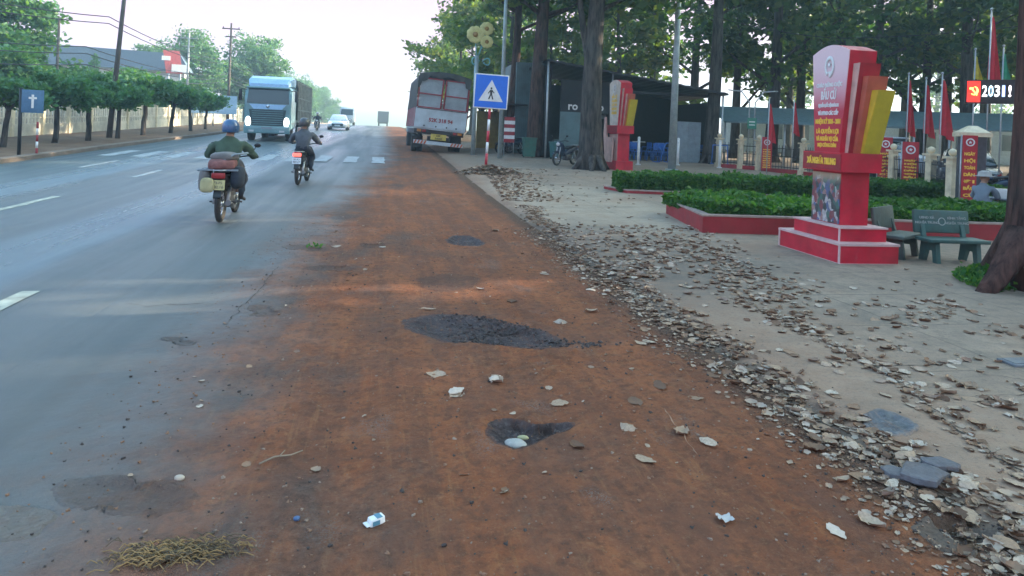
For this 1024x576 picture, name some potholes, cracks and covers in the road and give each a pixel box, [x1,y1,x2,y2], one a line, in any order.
pothole [485,418,575,450]
pothole [445,235,485,246]
pothole [161,337,196,346]
